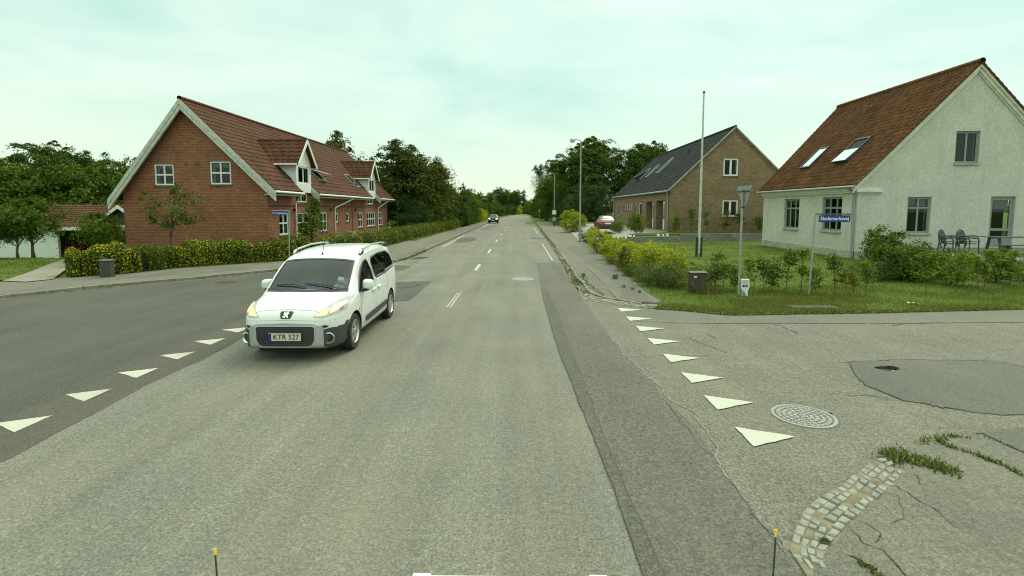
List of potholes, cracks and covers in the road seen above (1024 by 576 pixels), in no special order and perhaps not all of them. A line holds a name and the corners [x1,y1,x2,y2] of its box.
manhole cover [770,404,839,429]
crack [850,474,965,576]
